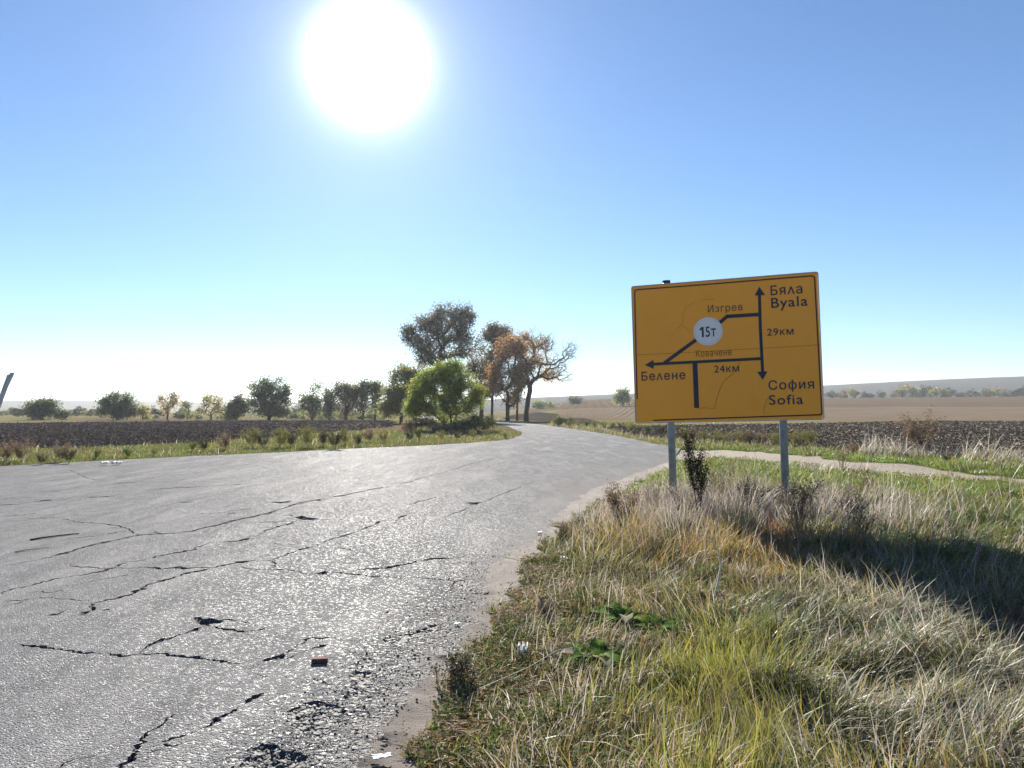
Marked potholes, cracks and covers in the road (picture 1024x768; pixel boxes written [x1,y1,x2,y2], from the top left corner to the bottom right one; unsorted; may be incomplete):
pothole [238,744,311,768]
crack [1,484,500,616]
crack [284,637,359,660]
pothole [194,617,224,627]
crack [19,609,308,768]
pothole [286,701,349,740]
